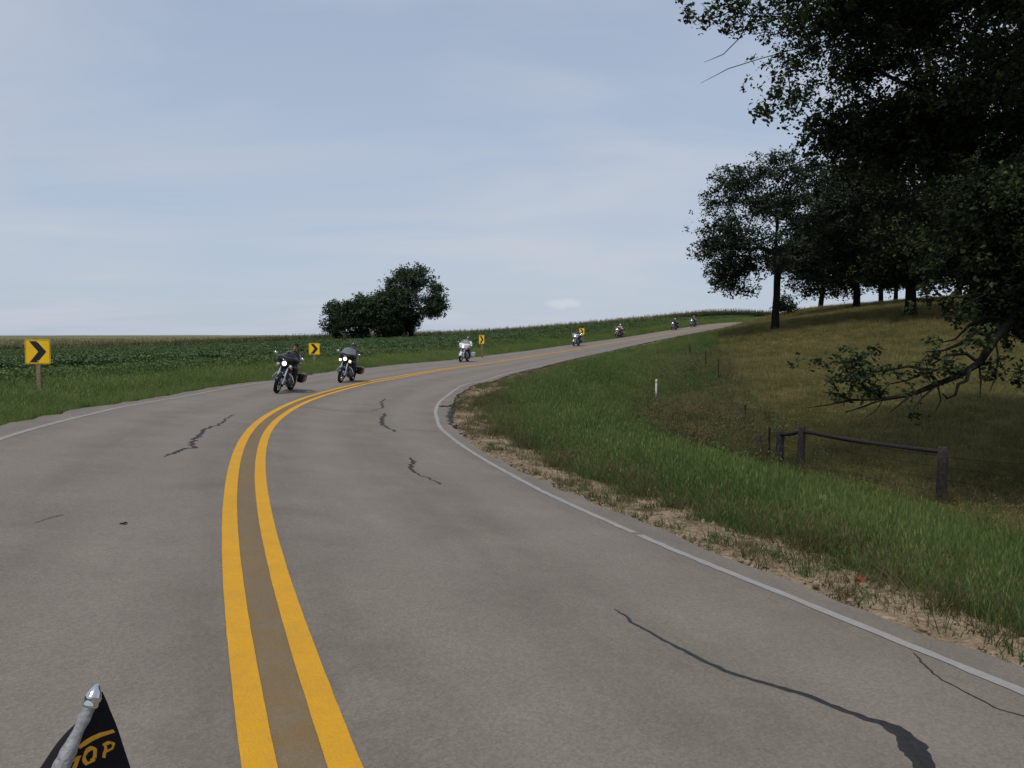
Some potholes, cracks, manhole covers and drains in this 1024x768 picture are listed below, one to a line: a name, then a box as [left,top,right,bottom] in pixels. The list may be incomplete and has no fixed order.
crack [165,415,232,457]
crack [372,399,455,432]
crack [913,652,1024,717]
crack [408,457,441,484]
